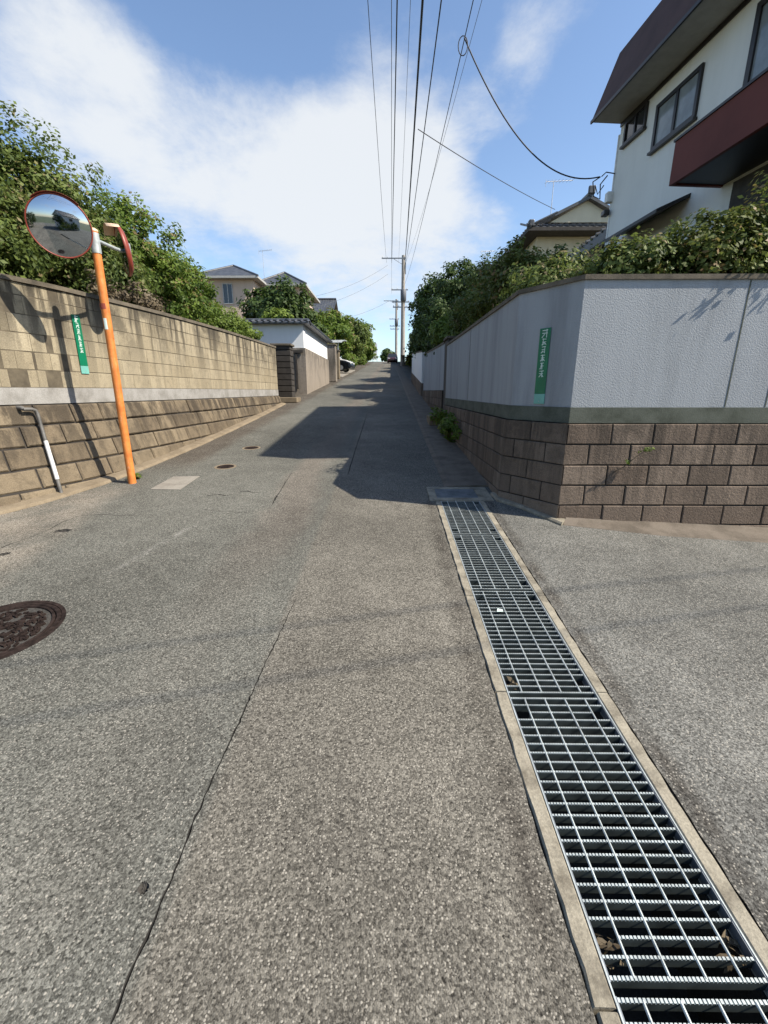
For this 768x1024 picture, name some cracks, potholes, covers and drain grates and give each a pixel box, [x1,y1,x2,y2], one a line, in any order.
drain grate [473,591,595,699]
drain grate [453,535,532,592]
drain grate [441,501,499,536]
drain grate [615,996,768,1024]
drain grate [510,697,768,992]
manhole cover [0,600,66,659]
